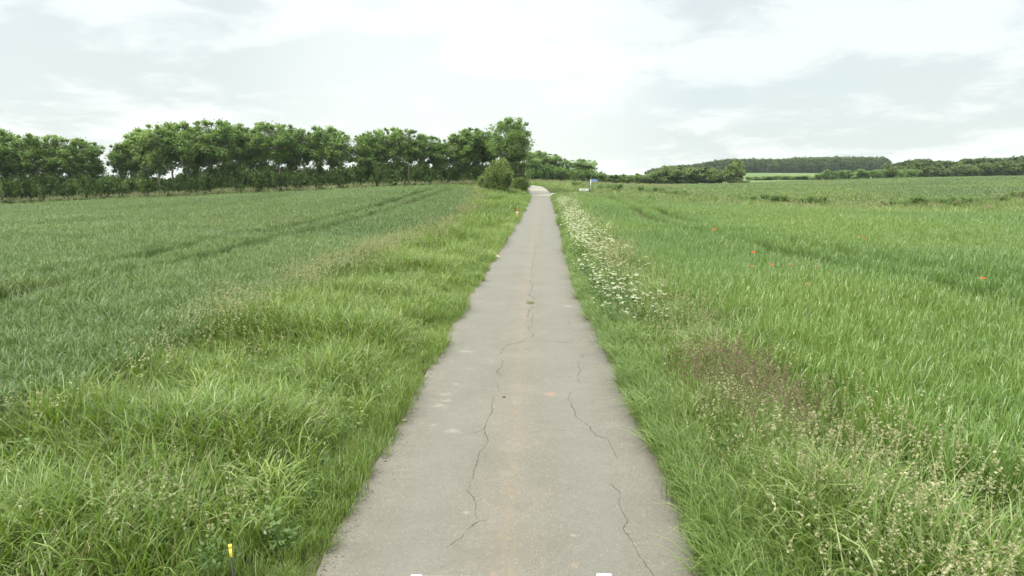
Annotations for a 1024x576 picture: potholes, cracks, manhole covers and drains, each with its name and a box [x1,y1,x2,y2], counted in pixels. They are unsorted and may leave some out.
crack [445,365,503,548]
crack [610,483,653,574]
